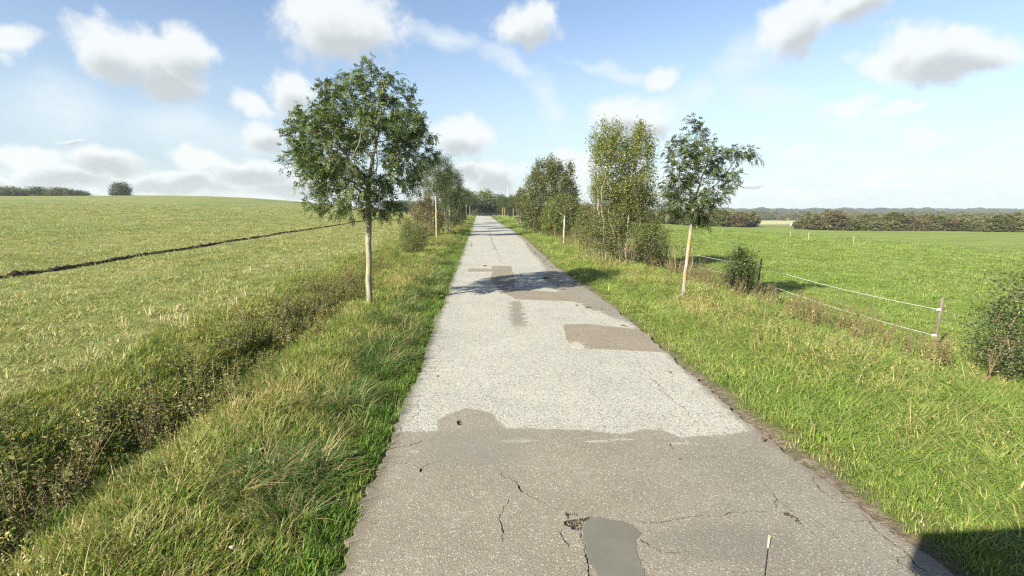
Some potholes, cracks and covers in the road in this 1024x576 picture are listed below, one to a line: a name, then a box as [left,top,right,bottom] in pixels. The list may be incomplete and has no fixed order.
crack [556,530,590,576]
pothole [564,516,592,531]
crack [498,470,546,541]
